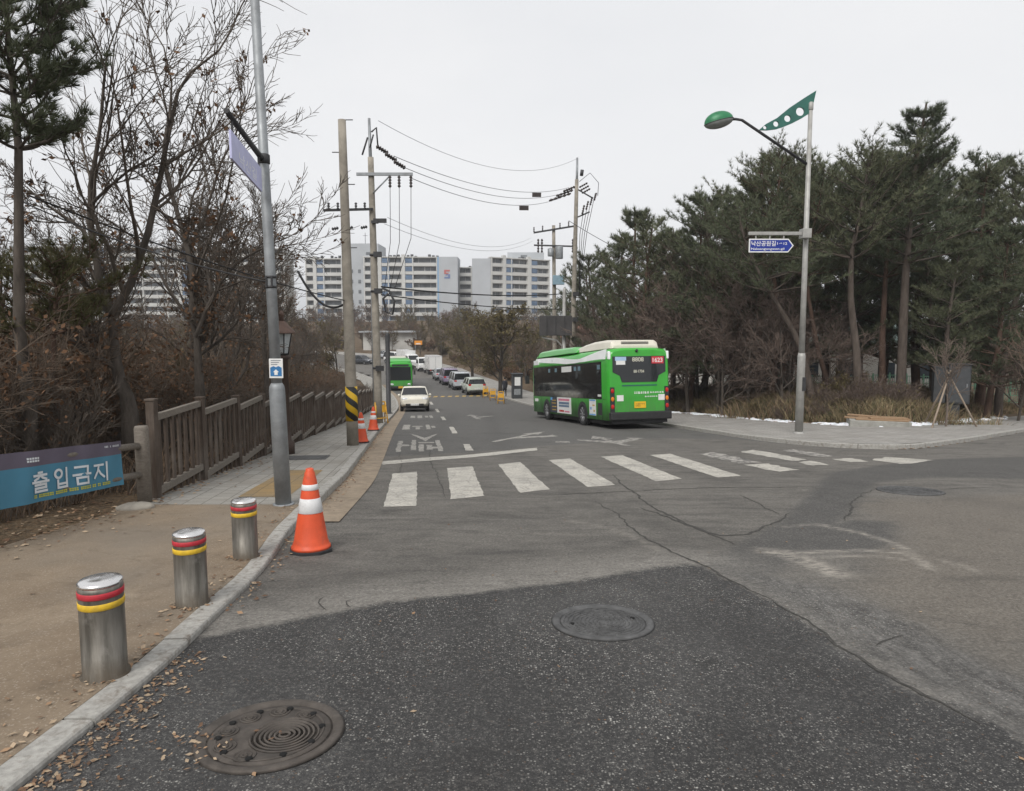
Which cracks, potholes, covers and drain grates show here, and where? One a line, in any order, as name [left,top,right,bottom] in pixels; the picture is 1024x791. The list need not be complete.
manhole cover [551,604,655,641]
crack [595,475,985,726]
manhole cover [876,486,946,496]
manhole cover [191,699,345,775]
